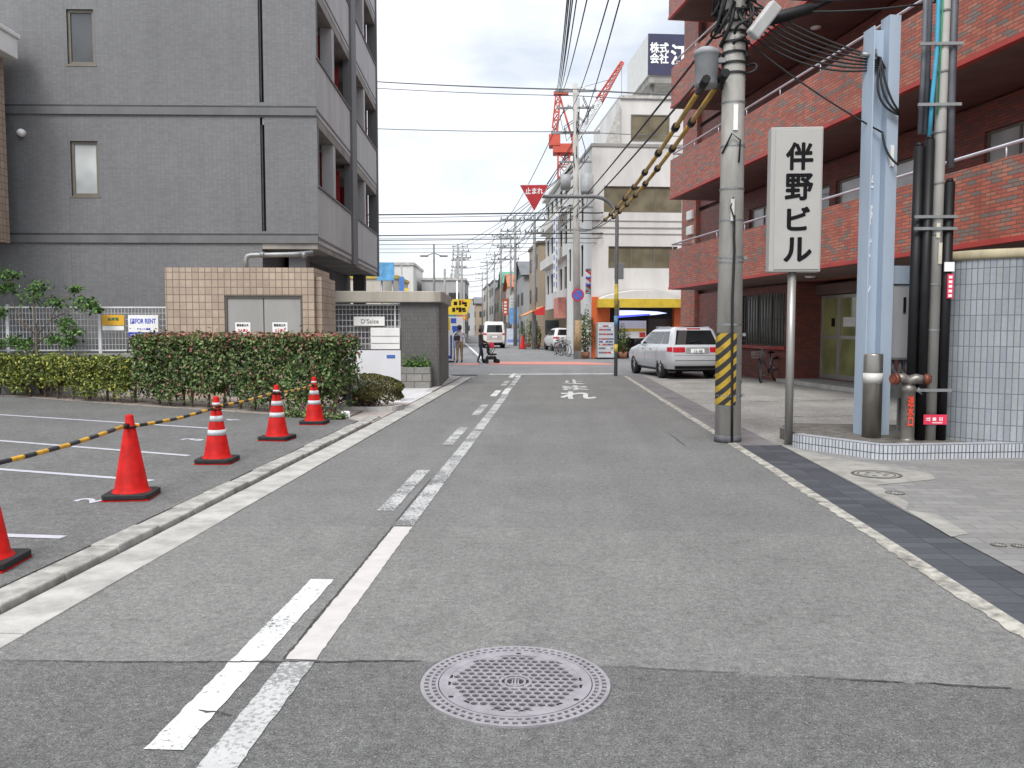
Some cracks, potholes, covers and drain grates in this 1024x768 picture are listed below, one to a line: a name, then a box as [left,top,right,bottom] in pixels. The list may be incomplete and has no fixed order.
manhole cover [420,646,610,729]
manhole cover [851,470,903,479]
